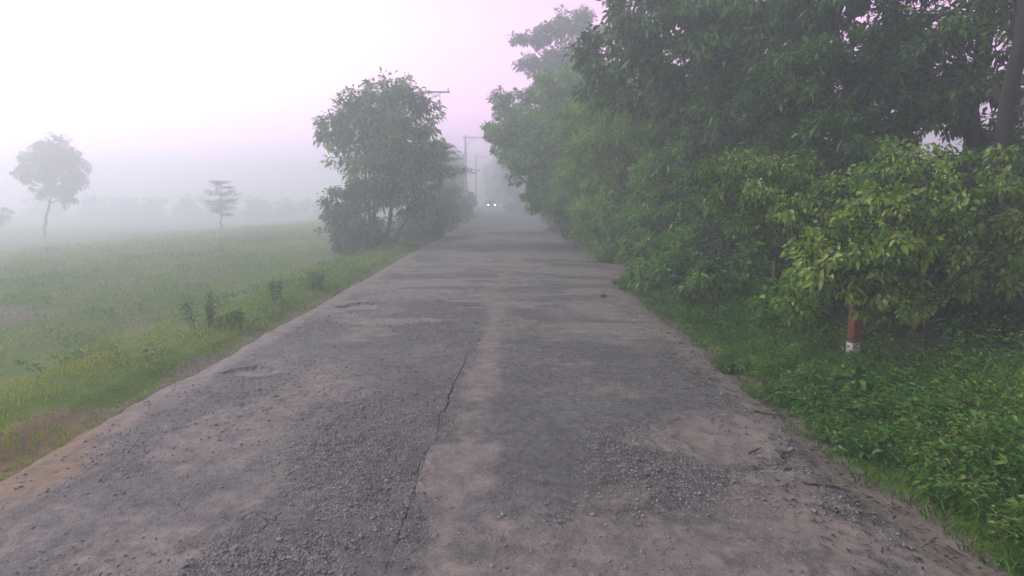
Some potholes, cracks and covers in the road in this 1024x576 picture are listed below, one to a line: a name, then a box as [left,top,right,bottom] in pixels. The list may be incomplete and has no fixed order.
crack [386,359,466,572]
pothole [329,301,387,311]
pothole [211,364,286,379]
